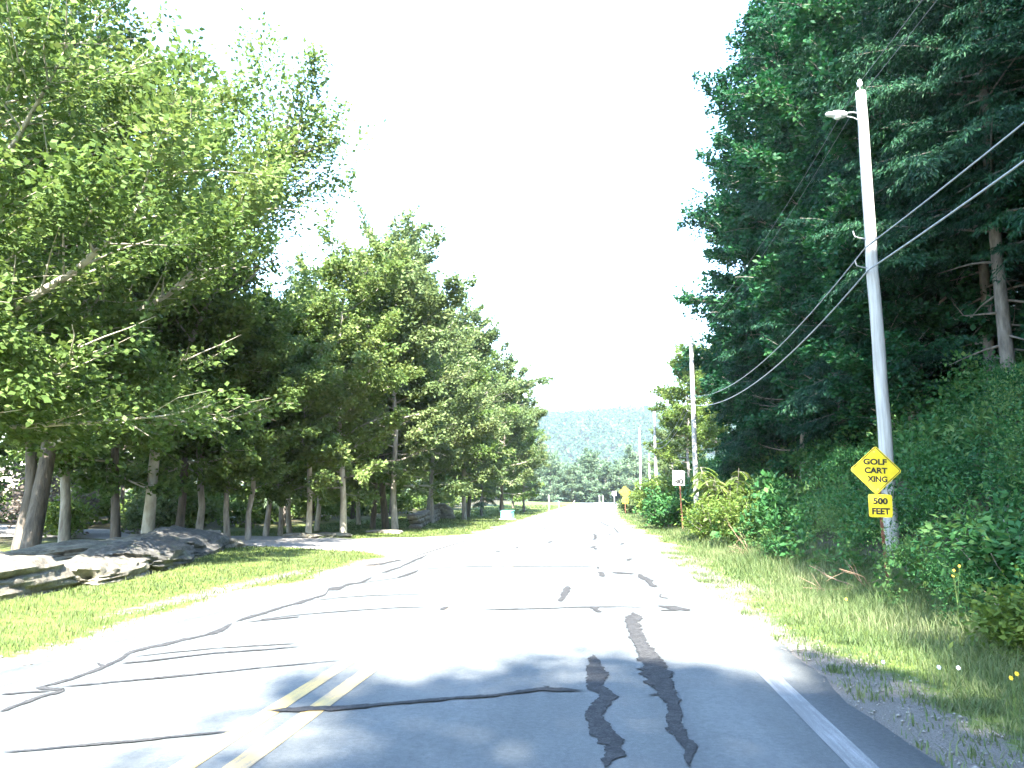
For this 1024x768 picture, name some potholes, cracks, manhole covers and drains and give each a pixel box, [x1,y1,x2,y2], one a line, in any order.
crack [3,730,232,752]
crack [496,522,691,611]
crack [240,554,471,623]
crack [57,643,344,687]
